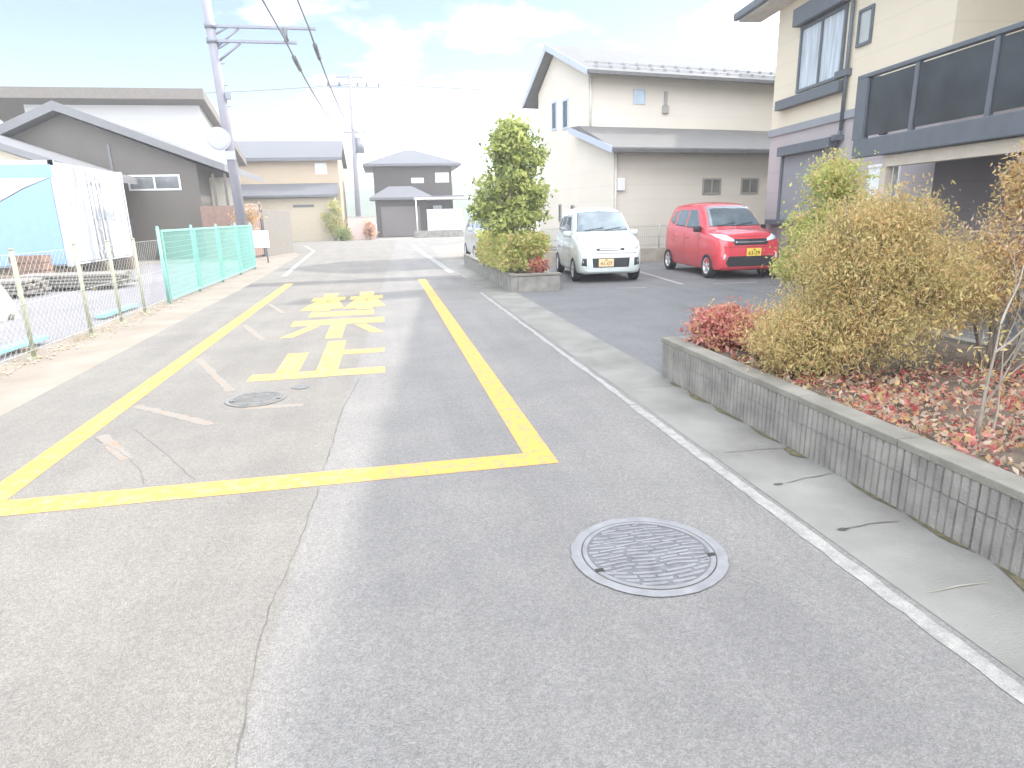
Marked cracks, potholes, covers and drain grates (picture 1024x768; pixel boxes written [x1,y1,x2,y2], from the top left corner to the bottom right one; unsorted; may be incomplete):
manhole cover [225,391,287,407]
manhole cover [571,517,729,597]
crack [96,429,195,484]
crack [235,488,319,768]
